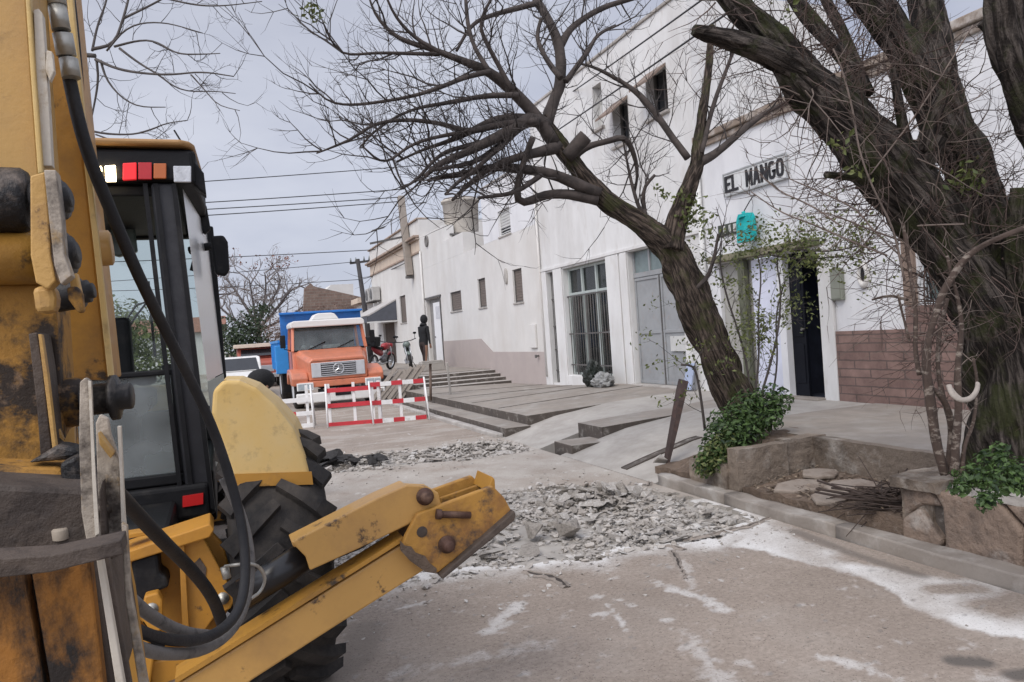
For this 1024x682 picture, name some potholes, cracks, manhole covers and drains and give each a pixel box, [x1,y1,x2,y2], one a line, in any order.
crack [664,517,772,579]
pothole [334,485,751,573]
pothole [325,445,527,473]
